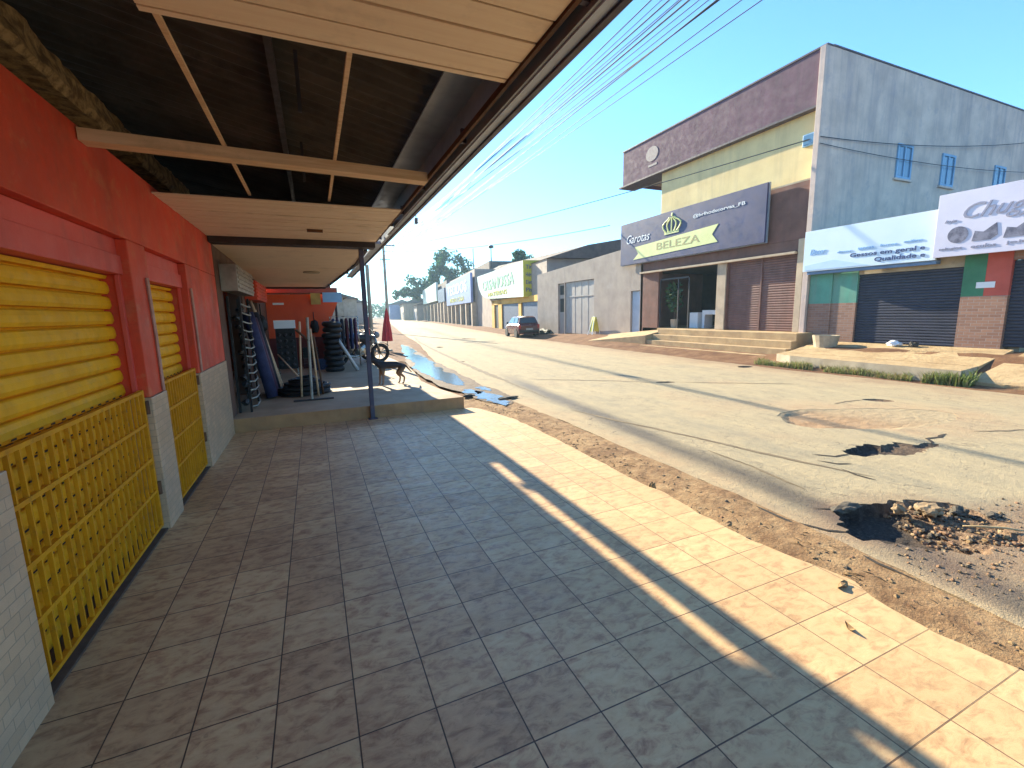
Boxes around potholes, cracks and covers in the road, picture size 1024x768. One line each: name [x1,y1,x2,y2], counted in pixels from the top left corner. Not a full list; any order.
crack [814,454,875,480]
pothole [843,442,939,457]
pothole [835,500,1024,556]
